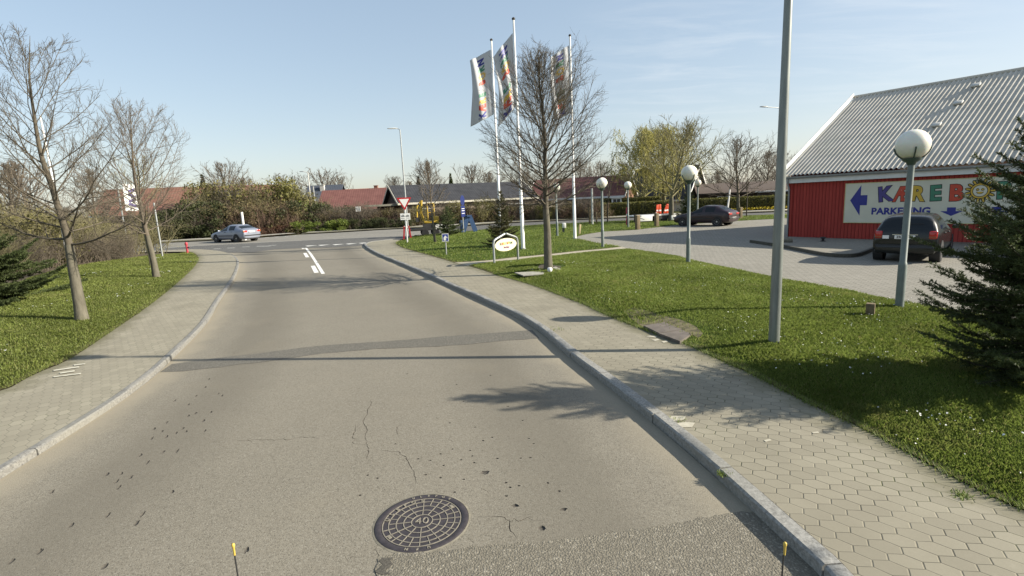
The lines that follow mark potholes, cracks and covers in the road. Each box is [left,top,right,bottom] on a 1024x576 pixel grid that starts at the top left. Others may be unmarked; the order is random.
manhole cover [372,494,471,553]
crack [352,401,416,493]
